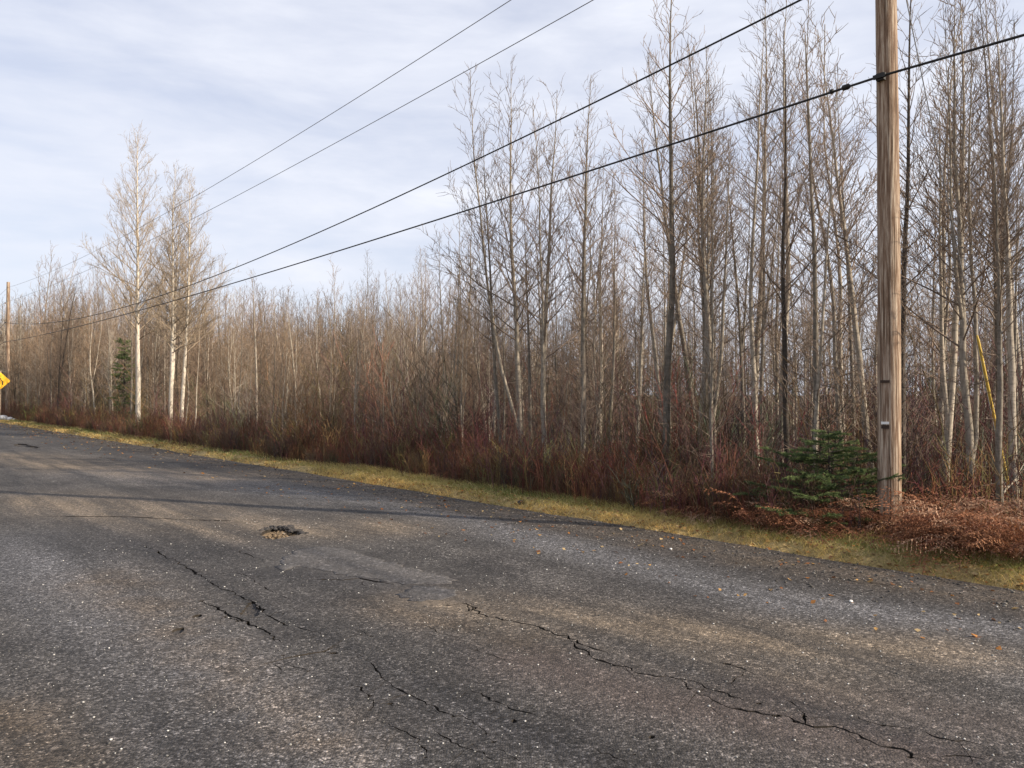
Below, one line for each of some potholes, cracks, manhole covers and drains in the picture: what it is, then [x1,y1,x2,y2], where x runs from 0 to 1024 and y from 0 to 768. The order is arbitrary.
pothole [259,525,309,539]
crack [145,545,556,768]
crack [429,602,1024,763]
